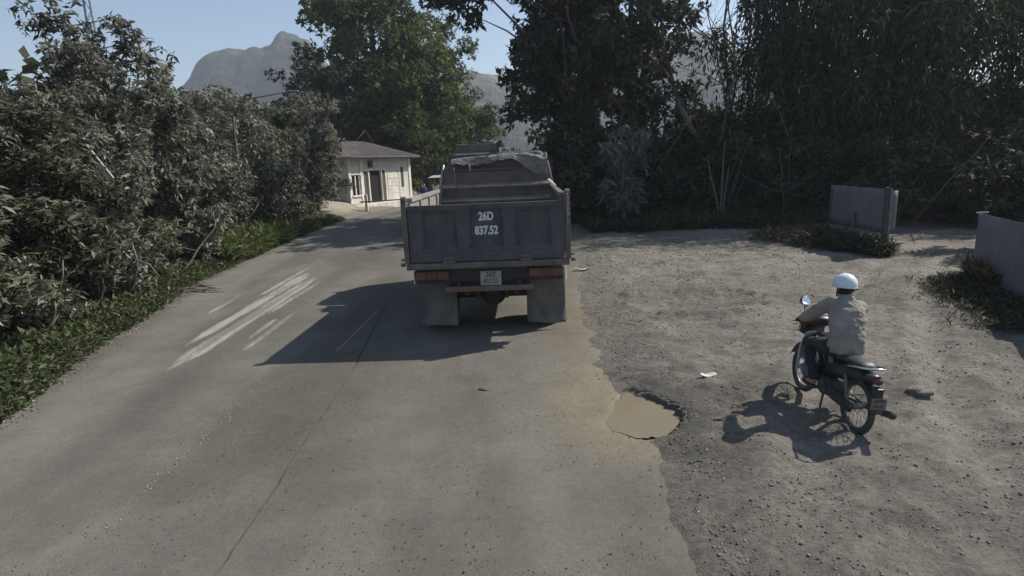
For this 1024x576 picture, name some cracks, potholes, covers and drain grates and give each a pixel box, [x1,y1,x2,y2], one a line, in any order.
pothole [621,390,689,440]
